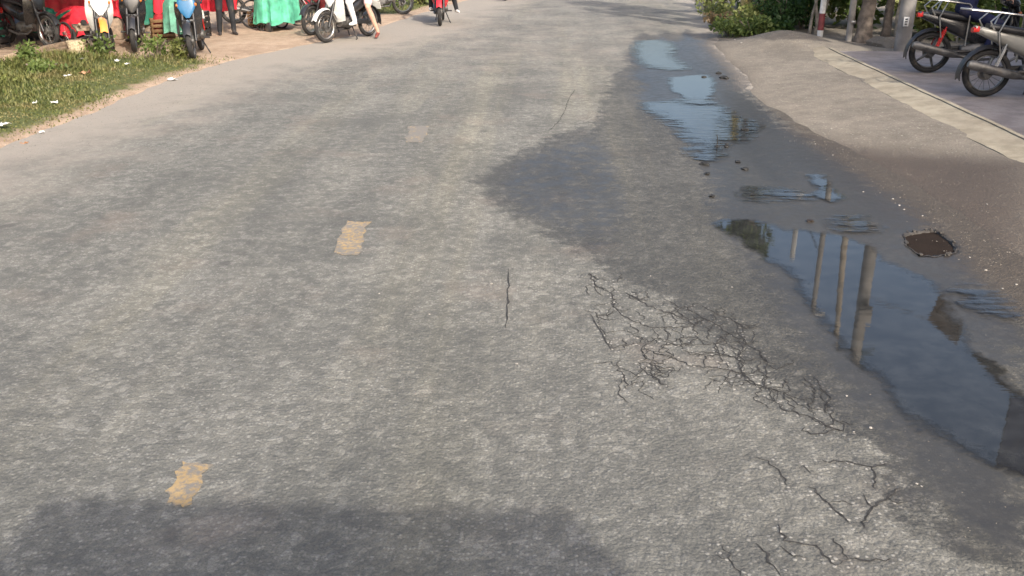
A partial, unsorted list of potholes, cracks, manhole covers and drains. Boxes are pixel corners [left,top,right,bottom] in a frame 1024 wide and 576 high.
crack [718,457,903,576]
crack [585,273,848,434]
